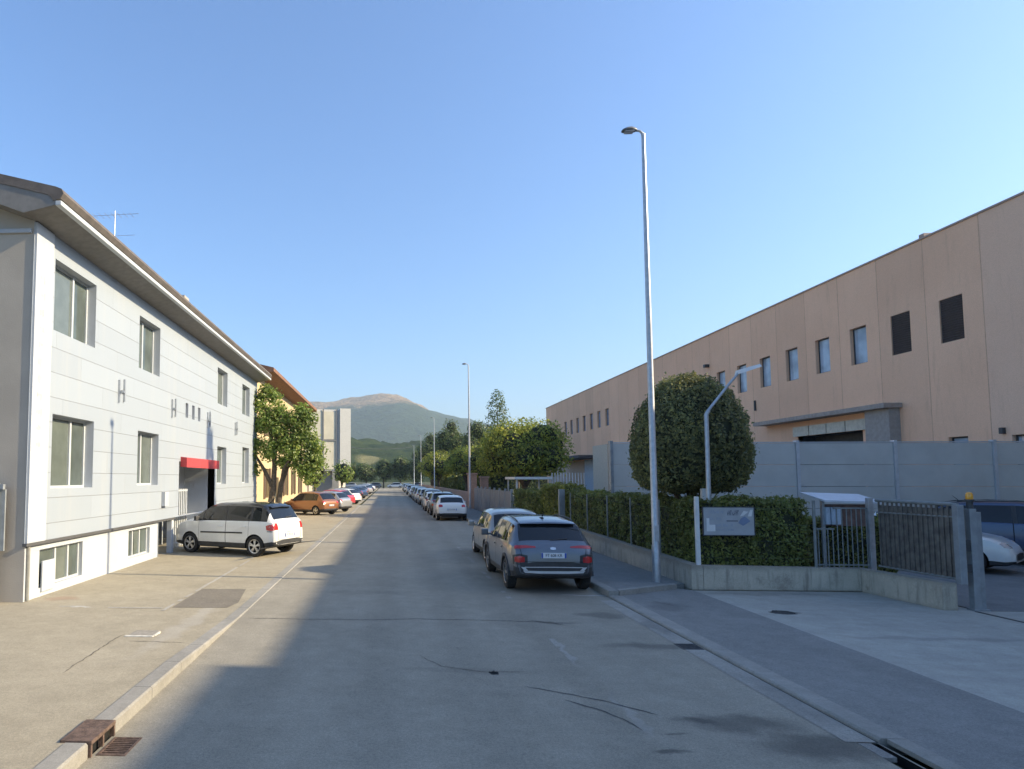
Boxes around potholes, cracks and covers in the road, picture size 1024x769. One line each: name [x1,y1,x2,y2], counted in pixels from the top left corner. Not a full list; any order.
drain grate [60,719,142,759]
crack [420,655,658,730]
crack [65,635,122,672]
drain grate [858,739,965,769]
